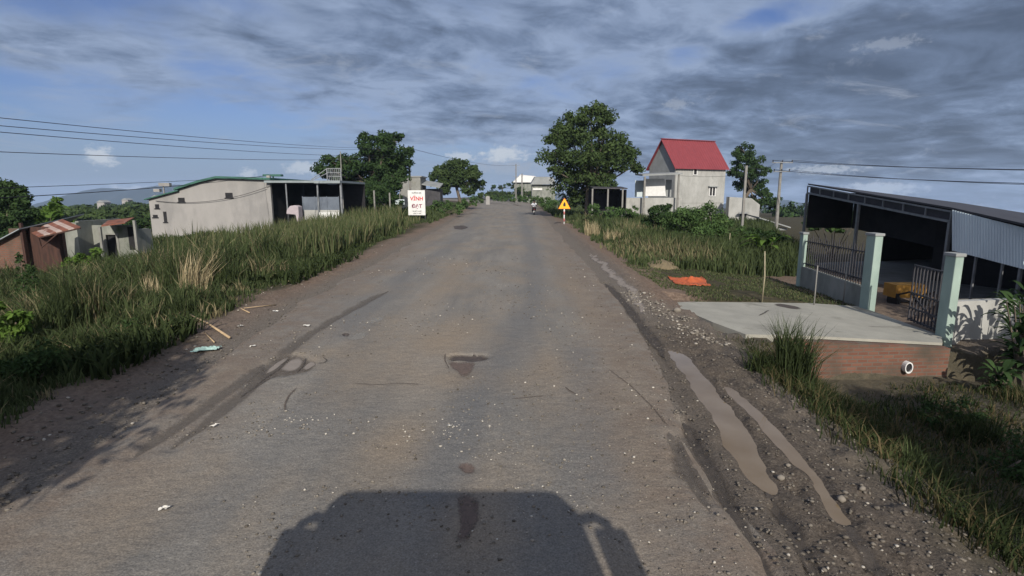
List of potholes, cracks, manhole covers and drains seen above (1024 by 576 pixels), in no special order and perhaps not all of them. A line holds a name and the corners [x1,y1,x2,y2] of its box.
crack [242,358,306,410]
pothole [458,497,479,539]
pothole [451,354,487,362]
pothole [459,463,474,473]
pothole [253,357,310,390]
crack [609,369,670,427]
